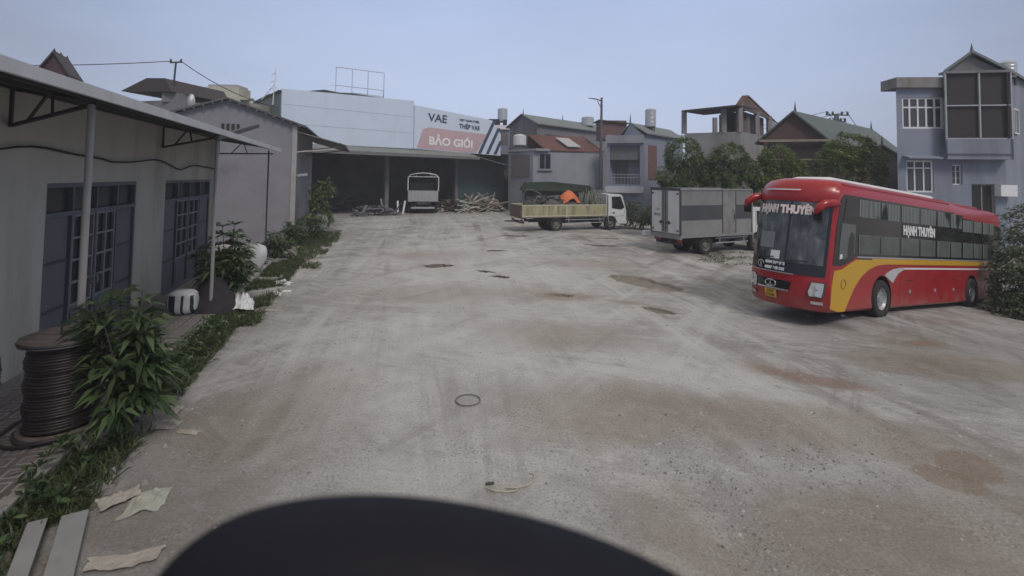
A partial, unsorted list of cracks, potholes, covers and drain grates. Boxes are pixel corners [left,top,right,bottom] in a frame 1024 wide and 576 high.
pothole [597,272,700,295]
pothole [635,305,685,317]
